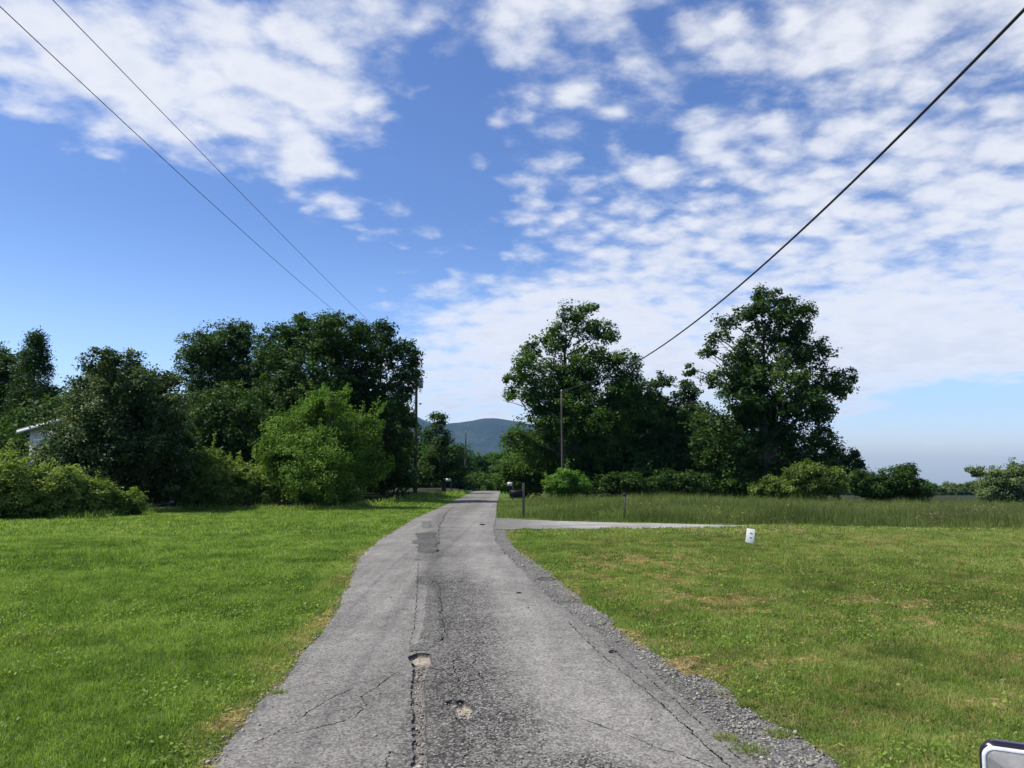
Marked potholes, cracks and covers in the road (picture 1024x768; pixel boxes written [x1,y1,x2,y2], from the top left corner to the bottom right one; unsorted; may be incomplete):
crack [569,621,741,768]
pothole [408,653,433,768]
crack [255,672,398,743]
pothole [445,700,475,721]
crack [409,559,491,683]
